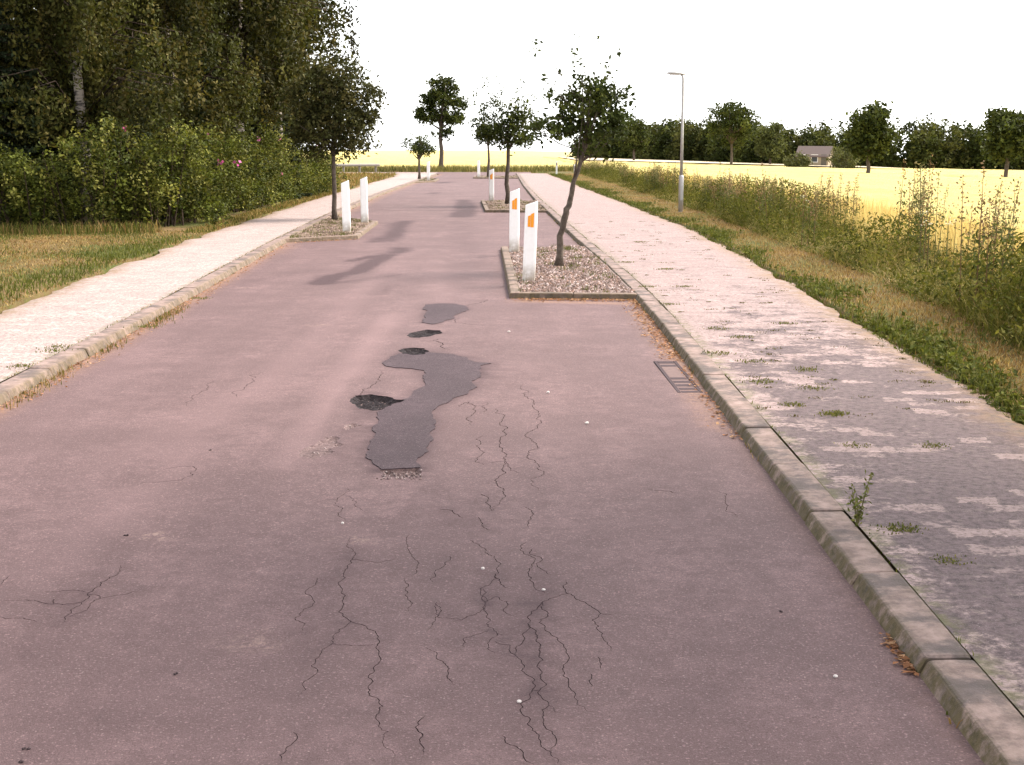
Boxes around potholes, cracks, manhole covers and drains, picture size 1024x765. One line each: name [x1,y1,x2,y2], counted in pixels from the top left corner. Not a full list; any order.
crack [504,542,611,764]
pothole [349,394,404,411]
pothole [407,330,442,338]
crack [443,385,544,530]
crack [2,565,131,621]
crack [404,536,516,681]
crack [280,538,394,761]
